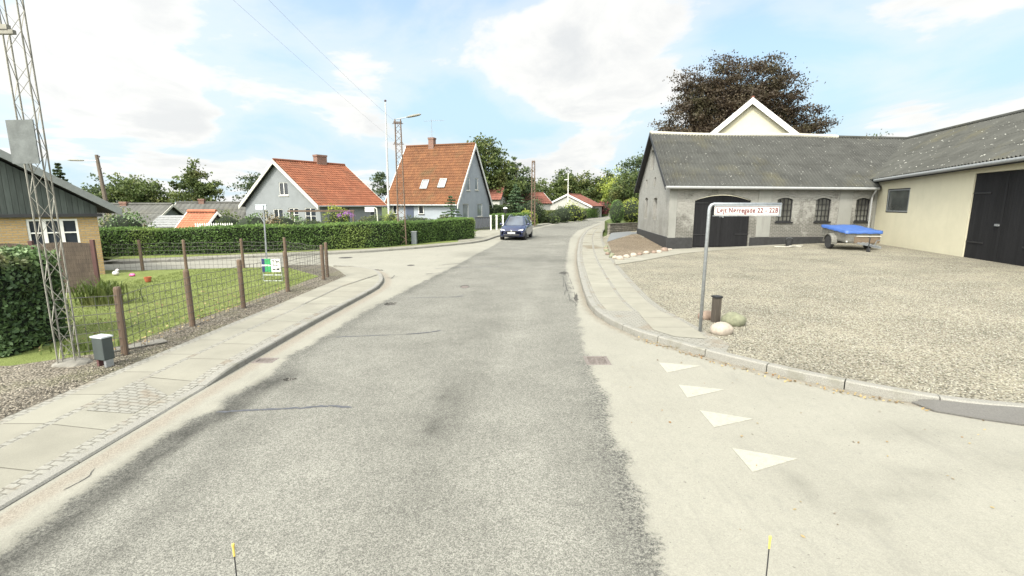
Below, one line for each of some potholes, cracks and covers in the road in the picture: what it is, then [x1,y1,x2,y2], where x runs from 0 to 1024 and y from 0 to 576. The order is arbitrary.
drain grate [583,356,612,365]
